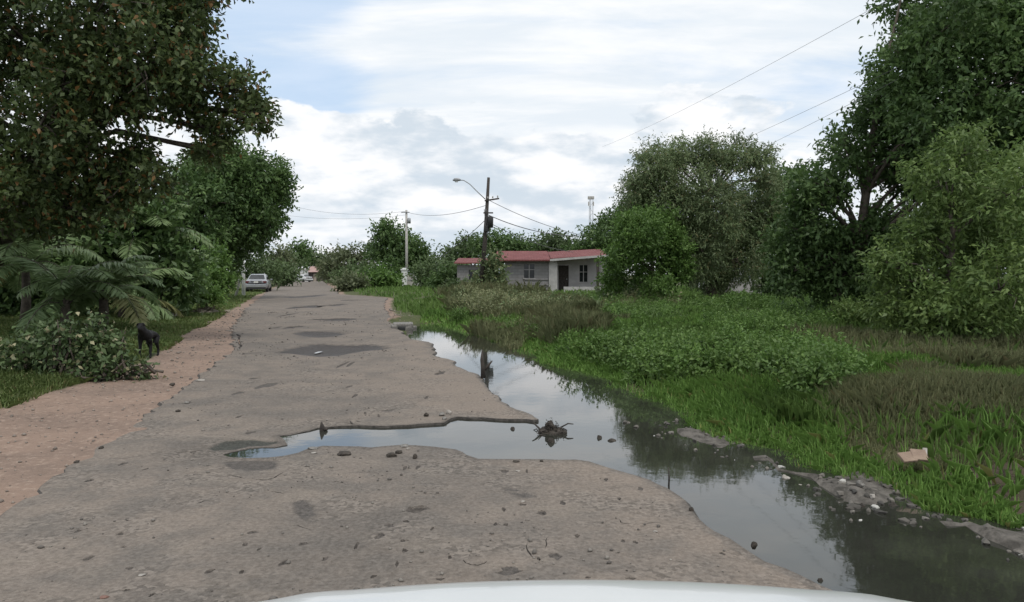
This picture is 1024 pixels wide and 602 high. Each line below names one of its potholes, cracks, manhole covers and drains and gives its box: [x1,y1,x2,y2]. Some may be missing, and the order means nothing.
pothole [225,419,595,463]
pothole [206,439,281,452]
pothole [286,330,352,338]
pothole [268,343,394,357]
pothole [221,459,281,472]
